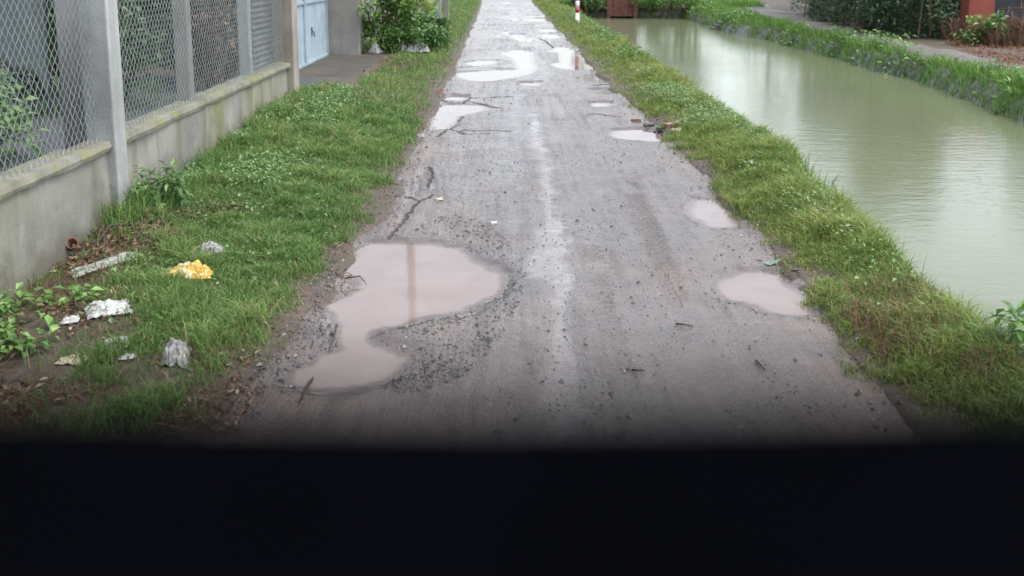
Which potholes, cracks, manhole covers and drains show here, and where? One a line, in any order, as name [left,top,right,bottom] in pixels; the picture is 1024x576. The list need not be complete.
crack [442,96,513,108]
pothole [678,196,750,230]
pothole [603,127,662,142]
pothole [427,102,492,130]
pothole [455,49,542,82]
crack [436,128,510,137]
pothole [701,267,821,318]
crack [386,167,435,240]
pothole [269,239,519,381]
